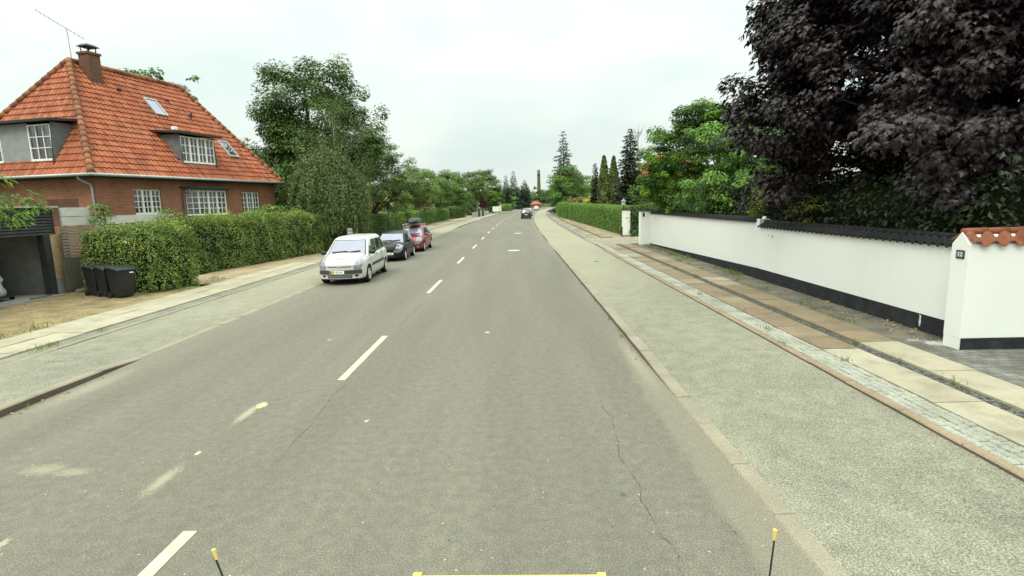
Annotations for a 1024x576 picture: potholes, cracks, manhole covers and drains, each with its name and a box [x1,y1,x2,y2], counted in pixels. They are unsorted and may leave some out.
crack [594,383,684,576]
